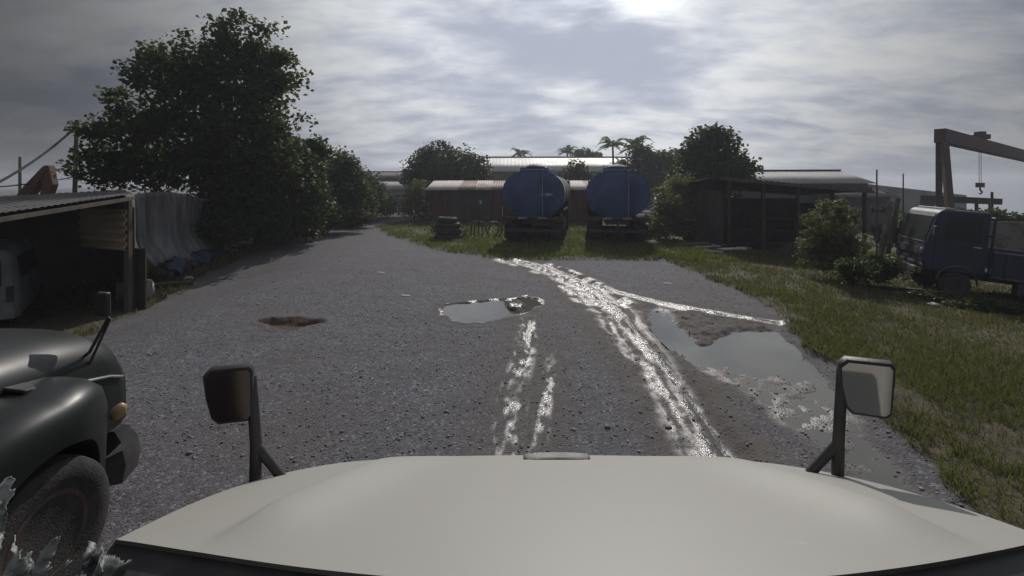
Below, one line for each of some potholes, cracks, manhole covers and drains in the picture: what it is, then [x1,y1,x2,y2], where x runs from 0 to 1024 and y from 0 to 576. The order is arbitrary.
pothole [424,292,558,328]
pothole [233,314,349,338]
